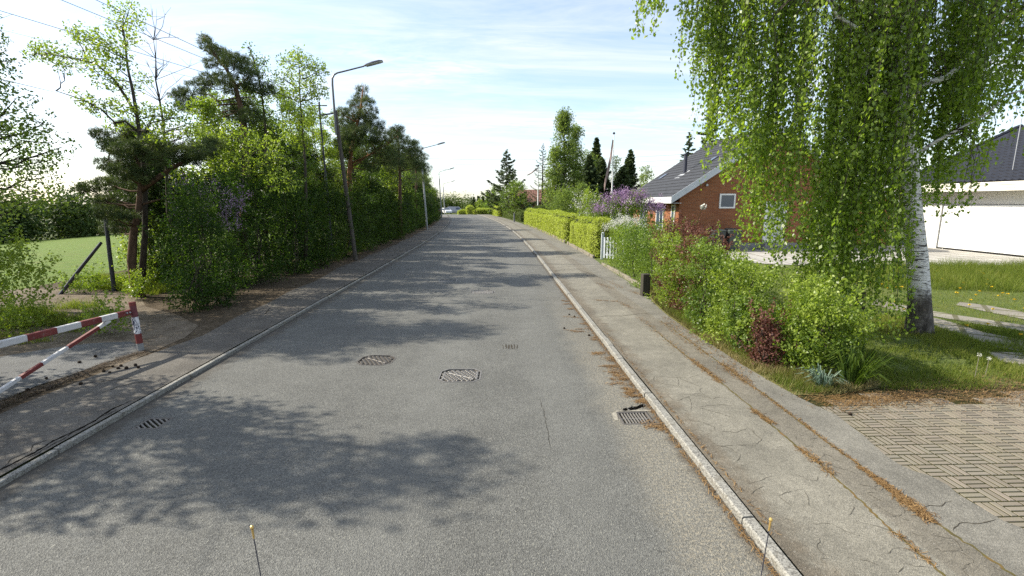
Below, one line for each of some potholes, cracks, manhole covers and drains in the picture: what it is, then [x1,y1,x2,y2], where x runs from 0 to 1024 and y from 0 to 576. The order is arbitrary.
crack [748,434,1003,576]
crack [653,375,762,461]
manhole cover [437,369,482,382]
drain grate [131,417,174,430]
drain grate [616,411,655,425]
manhole cover [356,355,396,366]
